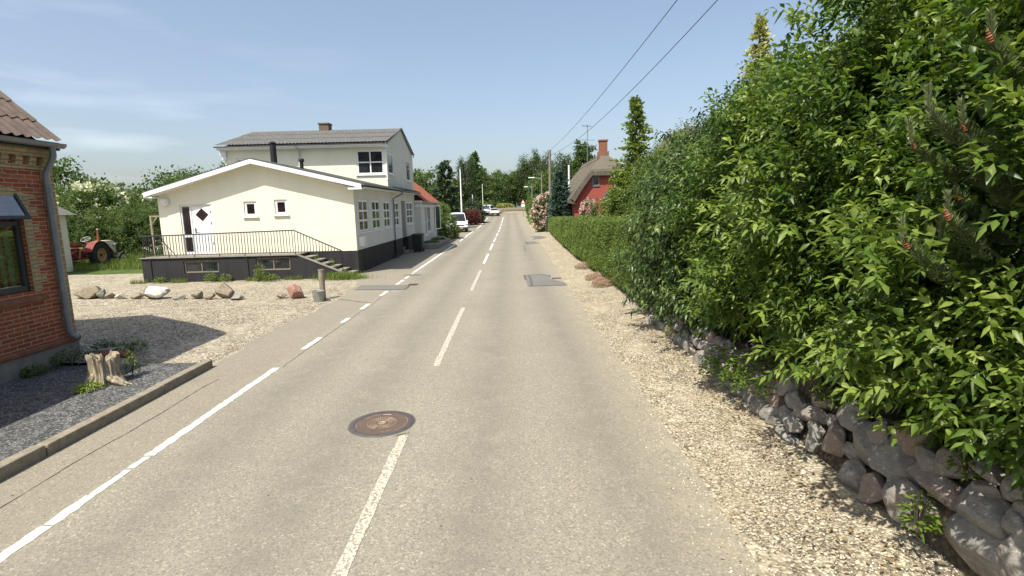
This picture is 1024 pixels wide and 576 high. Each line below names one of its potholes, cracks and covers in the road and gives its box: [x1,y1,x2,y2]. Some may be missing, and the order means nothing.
manhole cover [348,411,416,437]
